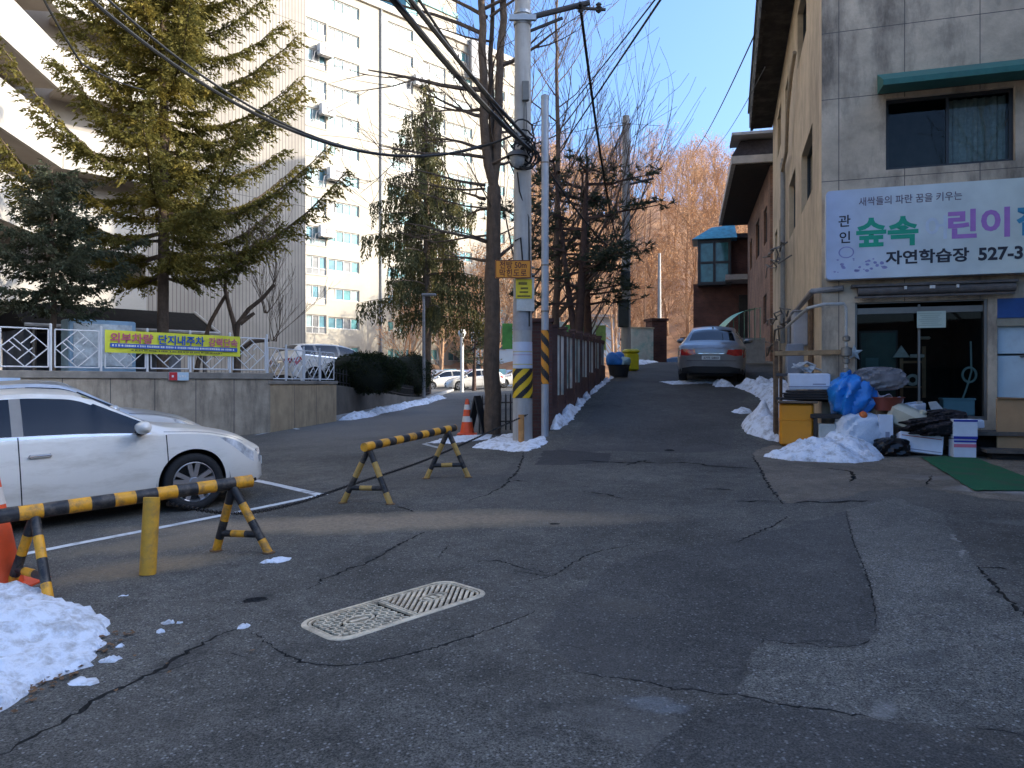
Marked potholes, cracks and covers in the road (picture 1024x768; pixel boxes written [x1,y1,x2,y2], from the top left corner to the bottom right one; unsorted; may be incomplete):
crack [0,611,535,755]
manhole cover [301,581,485,641]
crack [561,645,894,724]
crack [977,566,1024,617]
crack [492,543,636,581]
crack [308,532,425,589]
crack [591,453,788,544]
crack [471,452,528,500]
crack [800,467,857,483]
